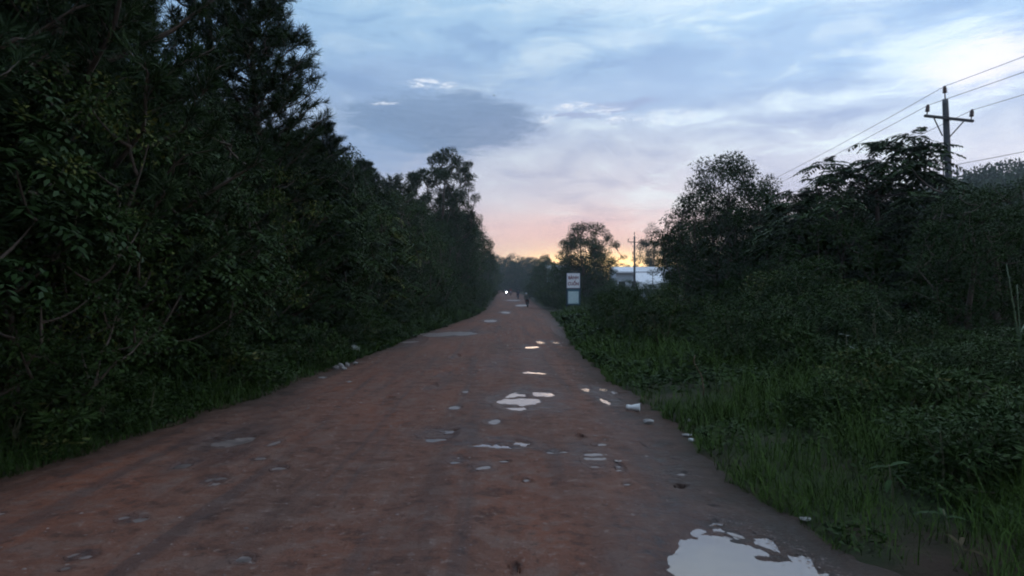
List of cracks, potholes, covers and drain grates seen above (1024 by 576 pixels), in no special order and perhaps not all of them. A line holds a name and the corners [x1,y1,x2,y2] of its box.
pothole [481,417,502,426]
pothole [480,387,564,413]
pothole [509,560,519,576]
pothole [186,426,272,451]
pothole [413,425,463,443]
pothole [623,501,865,576]
pothole [167,455,209,471]
pothole [113,513,150,524]
pothole [63,549,100,561]
pothole [197,473,234,488]
pothole [462,436,540,450]
pothole [577,449,615,470]
